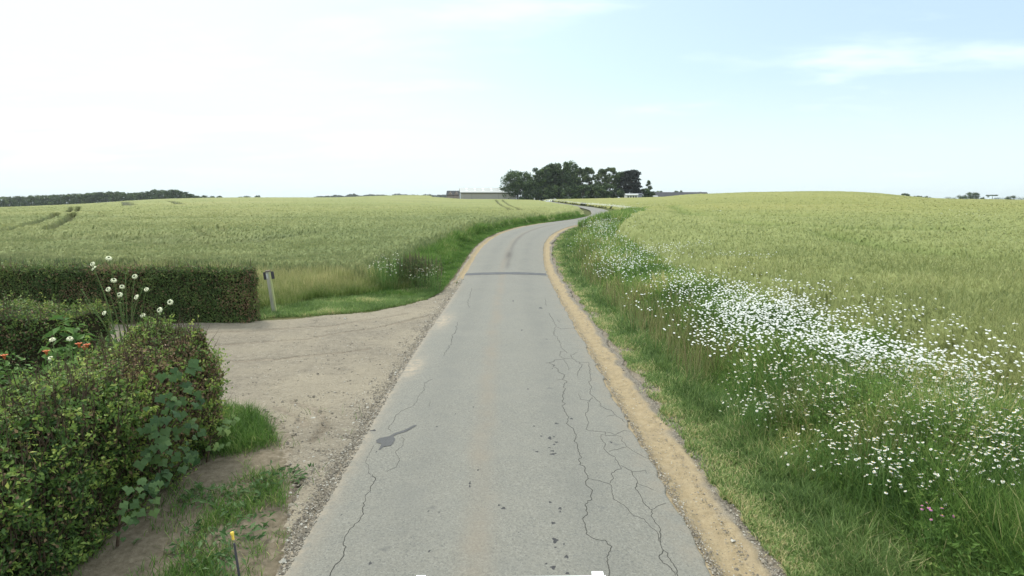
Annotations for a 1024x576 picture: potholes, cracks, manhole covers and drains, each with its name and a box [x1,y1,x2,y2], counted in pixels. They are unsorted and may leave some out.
crack [549,313,678,576]
crack [329,379,432,576]
